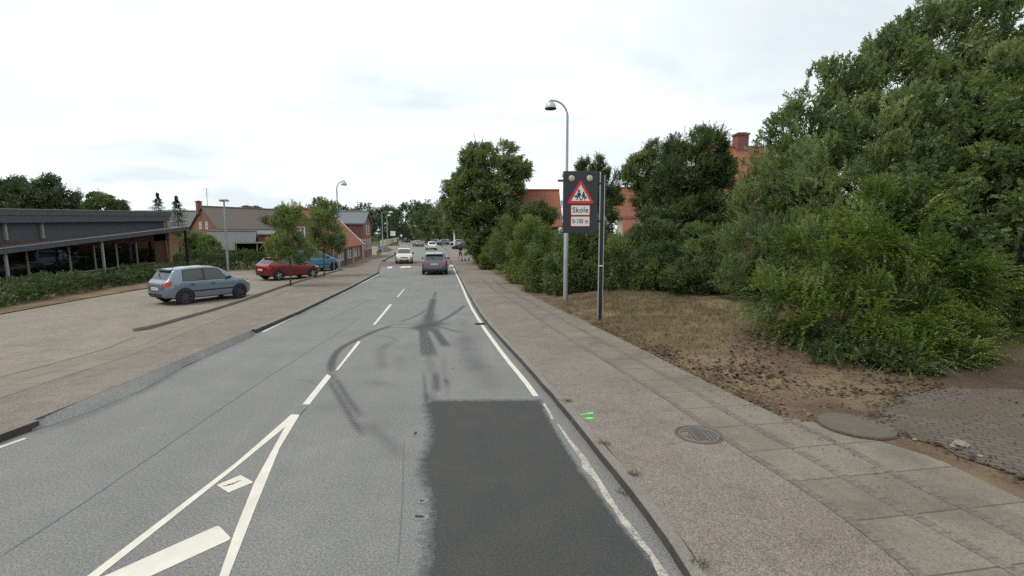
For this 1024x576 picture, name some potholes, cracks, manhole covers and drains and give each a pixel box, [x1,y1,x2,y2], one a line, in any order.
manhole cover [815,413,900,440]
manhole cover [674,425,724,444]
